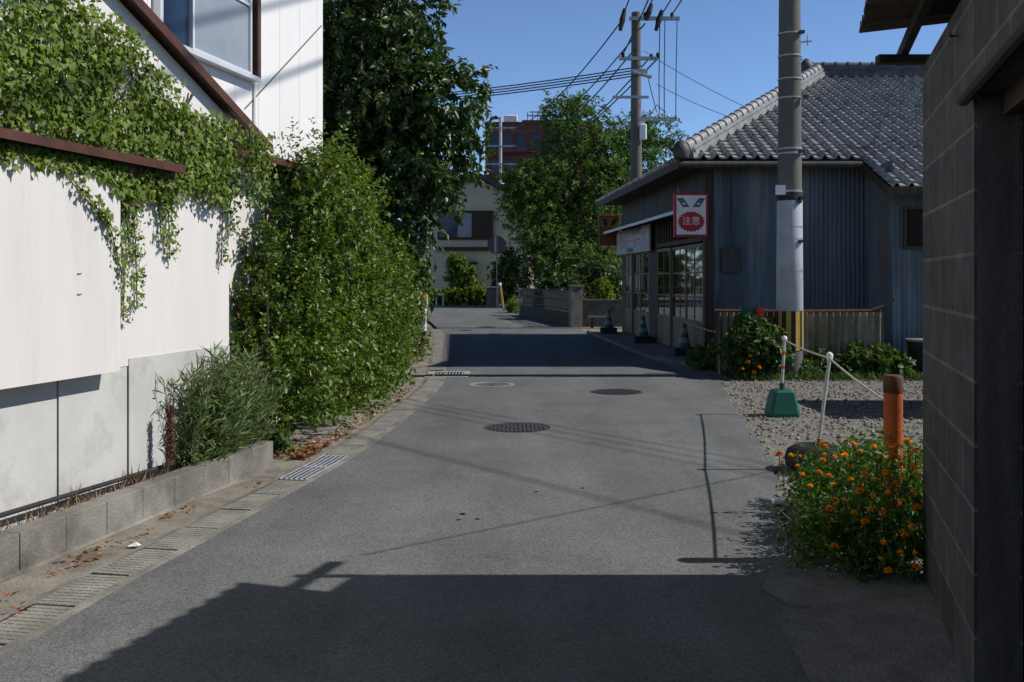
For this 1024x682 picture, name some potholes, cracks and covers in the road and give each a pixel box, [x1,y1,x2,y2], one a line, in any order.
manhole cover [484,422,551,433]
drain grate [279,454,348,481]
